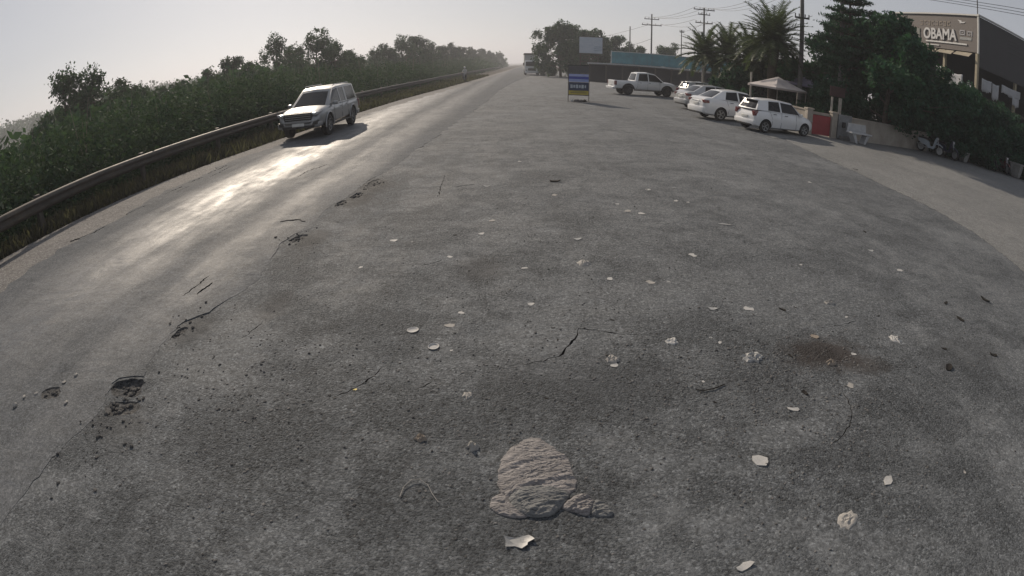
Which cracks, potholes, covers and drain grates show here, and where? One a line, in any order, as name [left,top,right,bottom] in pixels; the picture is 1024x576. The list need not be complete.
pothole [41,387,61,399]
crack [512,328,654,366]
pothole [104,401,141,417]
pothole [111,378,144,397]
crack [828,389,853,448]
pothole [367,179,385,188]
